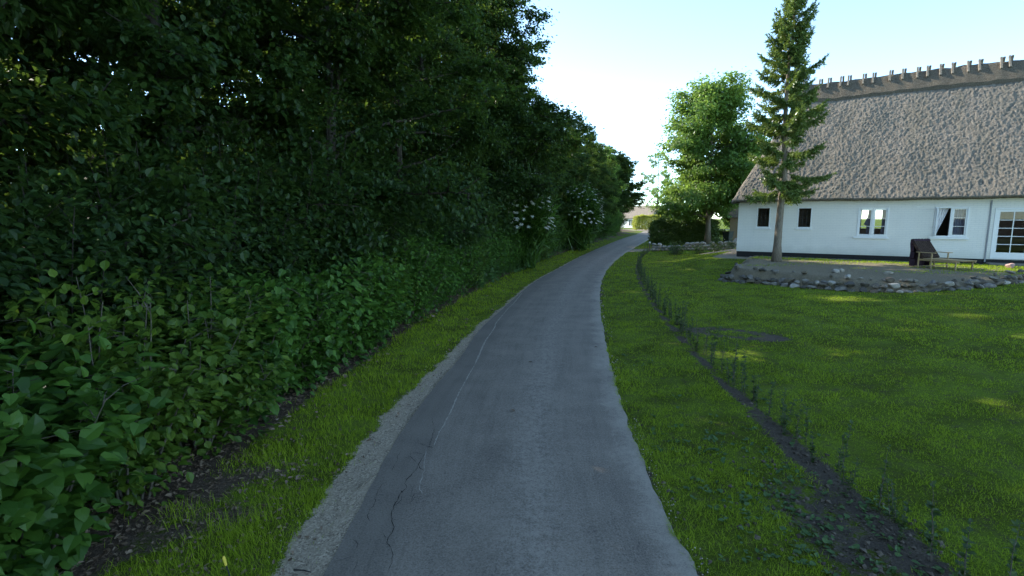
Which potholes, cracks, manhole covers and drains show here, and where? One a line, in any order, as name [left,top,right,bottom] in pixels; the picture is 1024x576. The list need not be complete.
crack [367,293,522,570]
